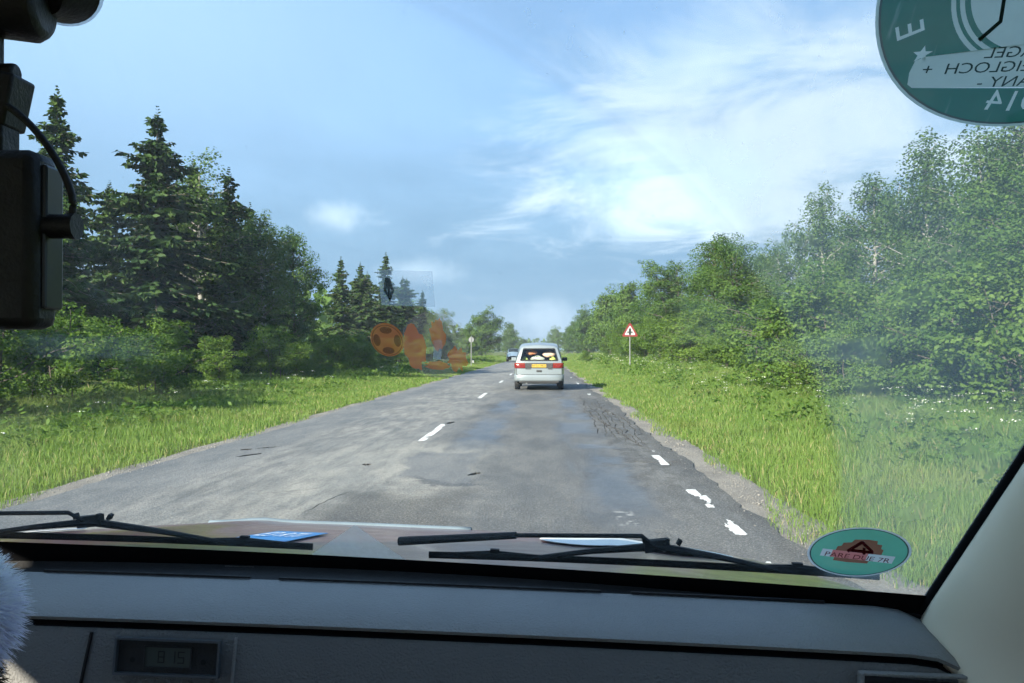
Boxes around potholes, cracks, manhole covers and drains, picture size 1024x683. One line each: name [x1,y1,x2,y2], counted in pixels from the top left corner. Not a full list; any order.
crack [579,397,671,466]
